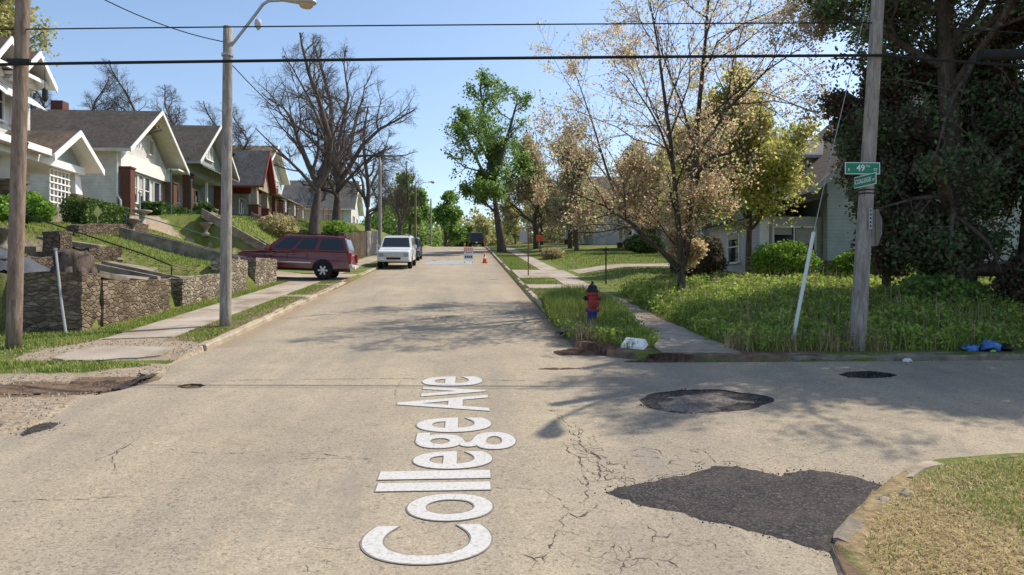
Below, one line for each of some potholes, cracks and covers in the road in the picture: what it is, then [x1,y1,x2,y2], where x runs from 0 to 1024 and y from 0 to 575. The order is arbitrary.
pothole [639,388,774,414]
pothole [839,370,896,378]
